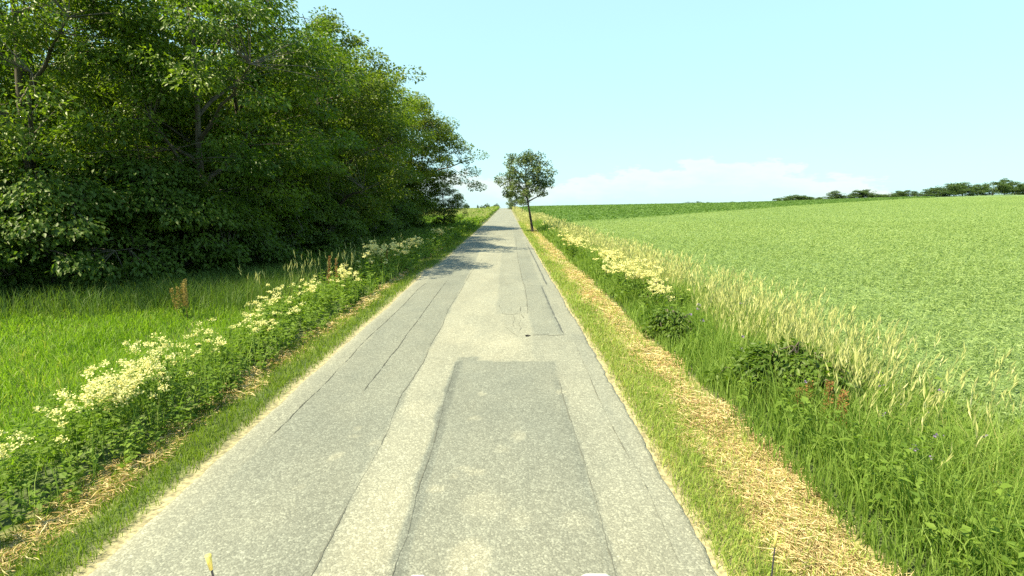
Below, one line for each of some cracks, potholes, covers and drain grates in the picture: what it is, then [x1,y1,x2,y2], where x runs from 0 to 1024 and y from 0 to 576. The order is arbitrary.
crack [499,247,528,336]
